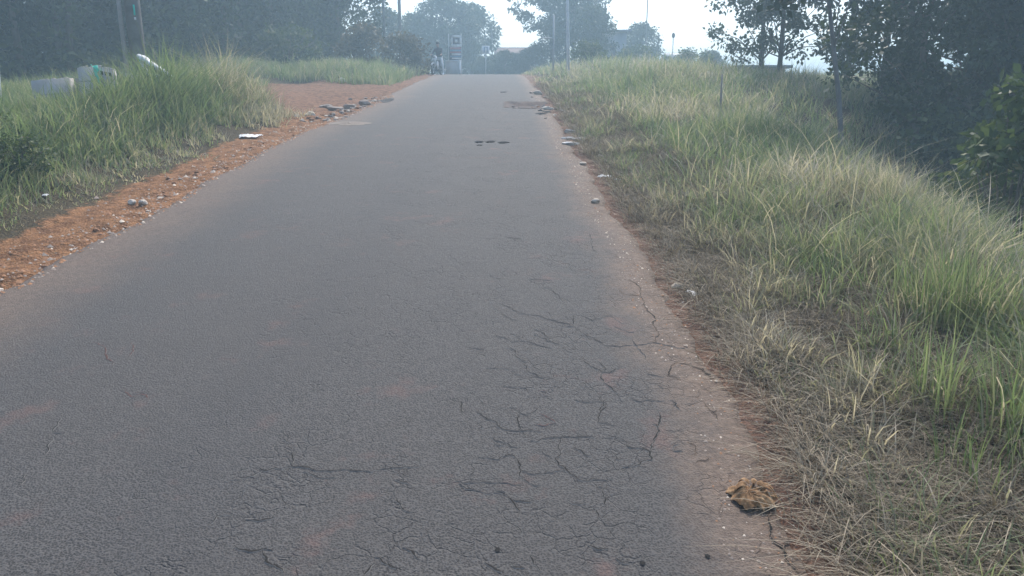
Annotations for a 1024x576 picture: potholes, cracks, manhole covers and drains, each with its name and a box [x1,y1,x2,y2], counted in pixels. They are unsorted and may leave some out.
crack [364,548,419,576]
crack [484,555,542,573]
crack [224,430,422,513]
crack [455,278,712,520]
crack [209,515,277,525]
crack [587,545,630,565]
crack [234,546,284,573]
crack [46,418,62,454]
